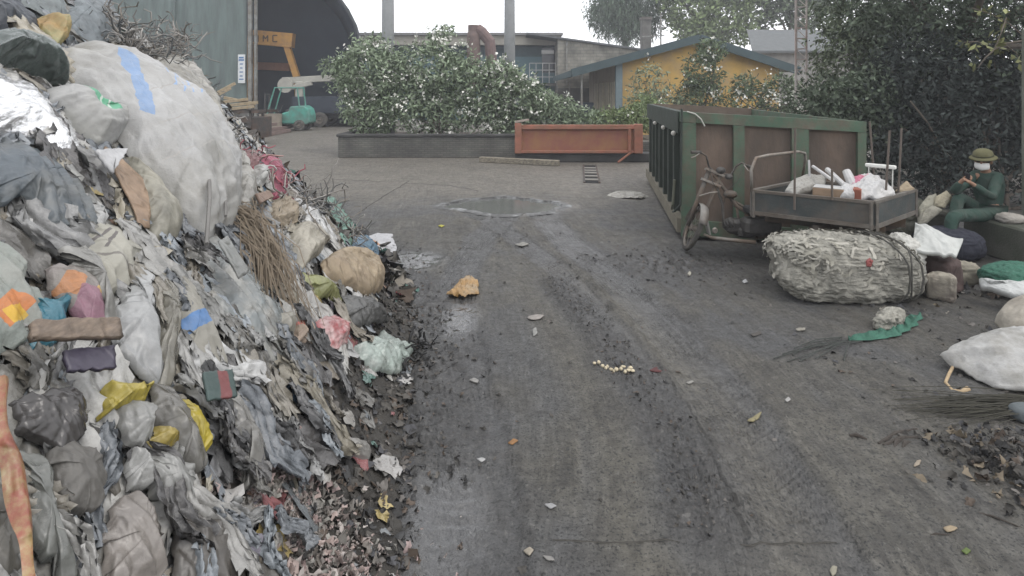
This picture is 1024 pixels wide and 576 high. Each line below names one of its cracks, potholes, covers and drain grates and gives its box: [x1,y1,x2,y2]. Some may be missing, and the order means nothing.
drain grate [583,165,601,183]
pothole [431,196,573,217]
